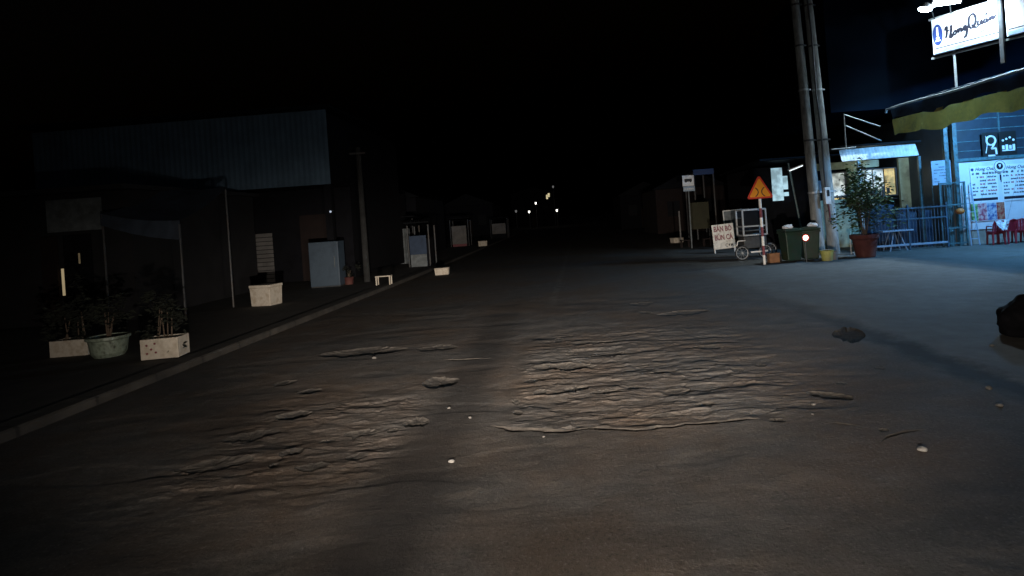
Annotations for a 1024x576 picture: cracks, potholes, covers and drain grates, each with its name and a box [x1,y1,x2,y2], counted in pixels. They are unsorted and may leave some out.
pothole [318,346,409,358]
crack [824,422,926,442]
pothole [806,391,854,401]
pothole [416,344,458,352]
pothole [343,429,379,439]
pothole [660,388,693,396]
pothole [422,377,459,389]
pothole [278,448,305,458]
pothole [275,410,313,421]
pothole [174,455,254,474]
pothole [294,461,330,472]
pothole [532,362,598,371]
